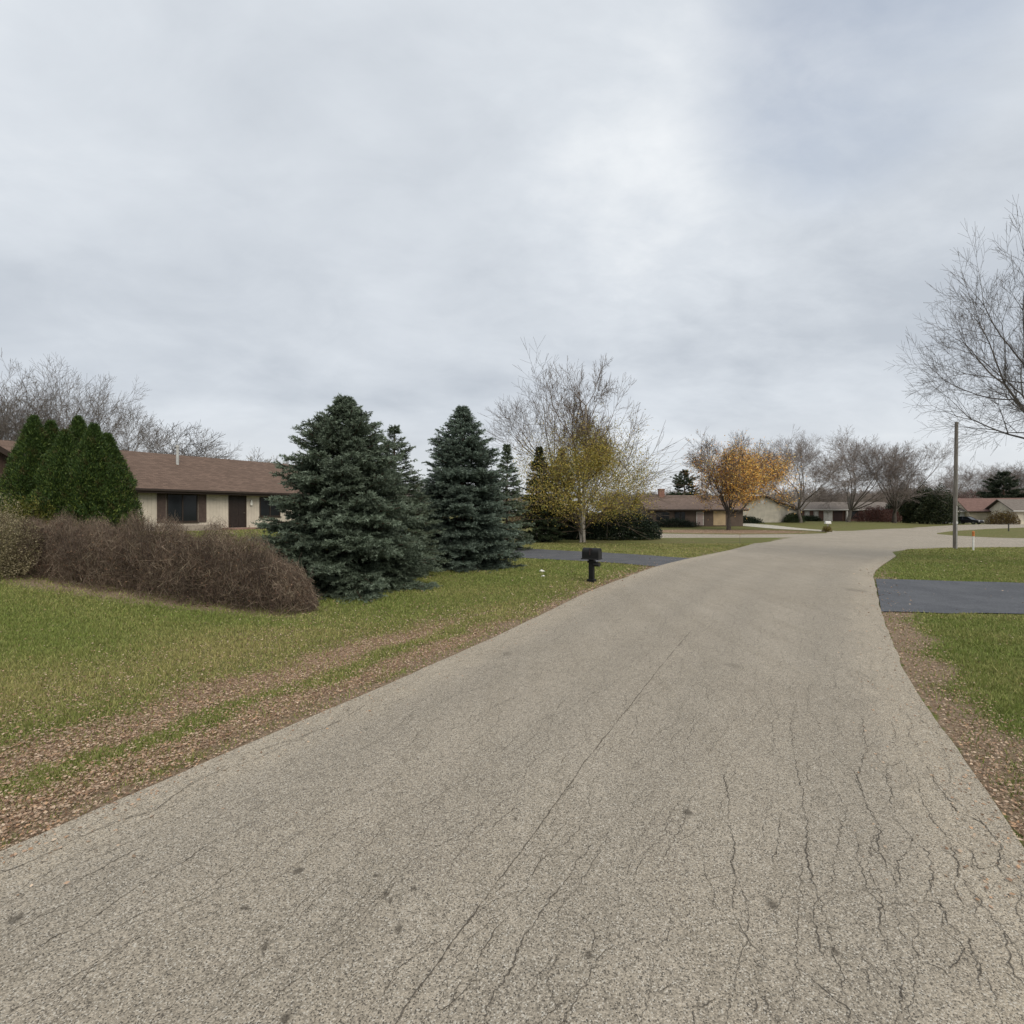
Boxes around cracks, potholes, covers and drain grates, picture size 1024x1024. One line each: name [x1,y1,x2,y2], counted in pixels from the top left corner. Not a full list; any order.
crack [0,579,710,1024]
crack [261,578,1024,1024]
